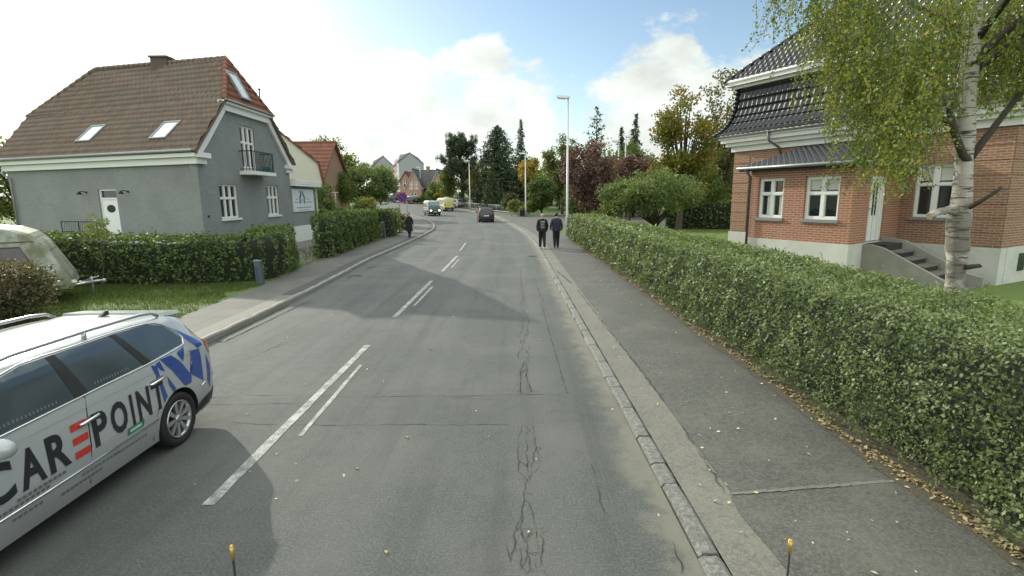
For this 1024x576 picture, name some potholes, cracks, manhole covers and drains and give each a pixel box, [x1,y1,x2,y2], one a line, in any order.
crack [506,424,547,575]
